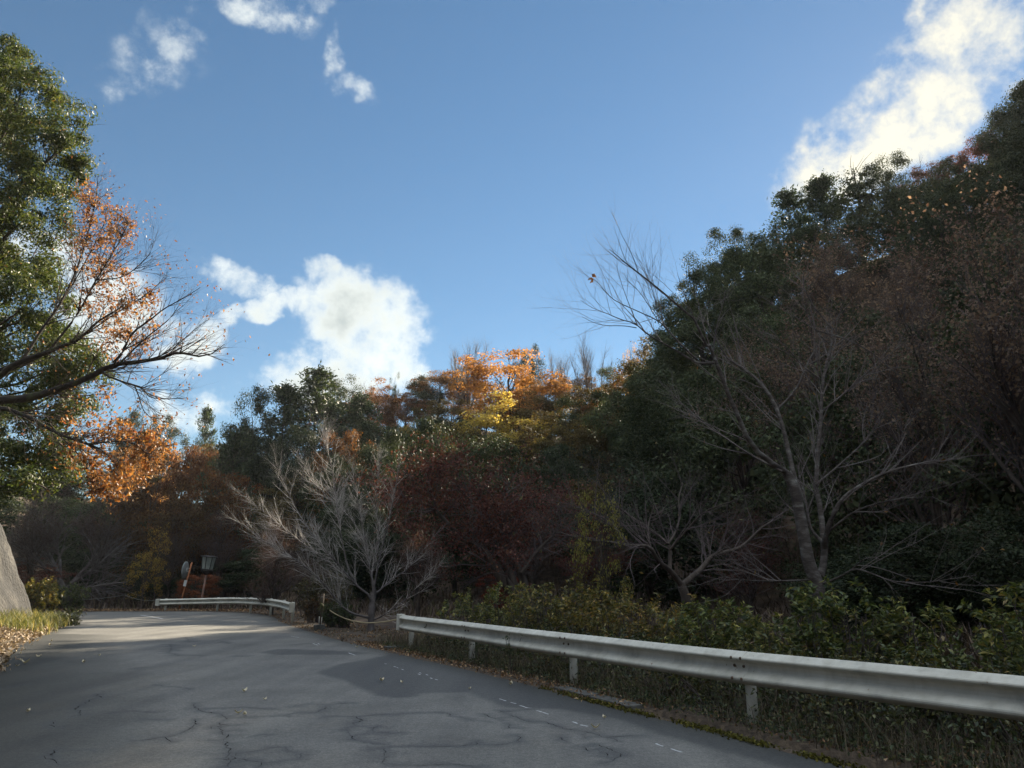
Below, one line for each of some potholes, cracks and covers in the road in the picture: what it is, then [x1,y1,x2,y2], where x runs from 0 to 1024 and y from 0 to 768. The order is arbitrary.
crack [148,703,262,766]
